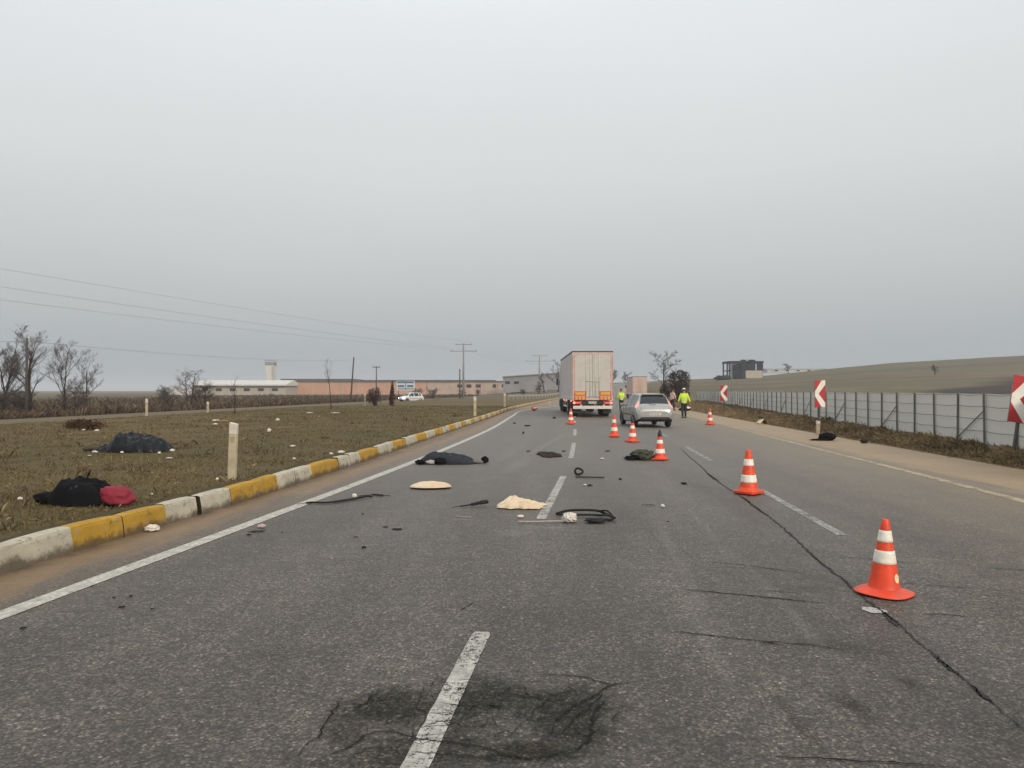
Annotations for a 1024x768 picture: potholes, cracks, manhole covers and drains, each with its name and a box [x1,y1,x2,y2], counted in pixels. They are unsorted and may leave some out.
crack [689,589,823,603]
crack [676,631,854,653]
crack [284,674,629,763]
